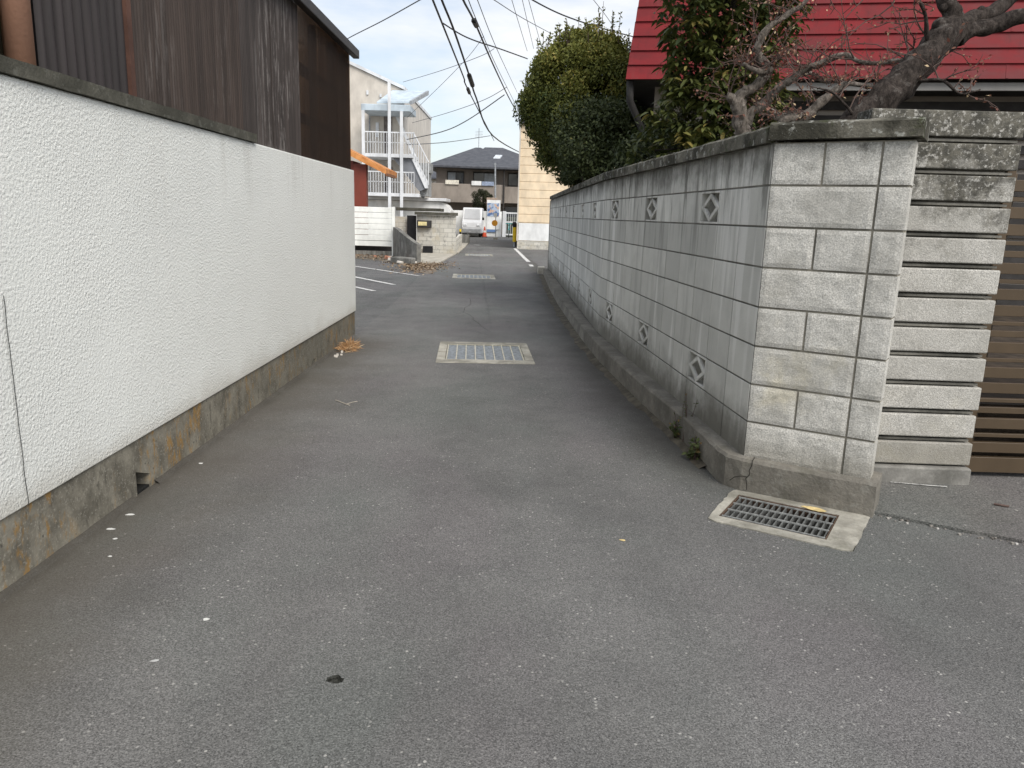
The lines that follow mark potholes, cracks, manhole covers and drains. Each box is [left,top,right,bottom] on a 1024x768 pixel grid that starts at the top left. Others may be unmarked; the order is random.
drain grate [708,490,870,552]
drain grate [435,341,535,364]
